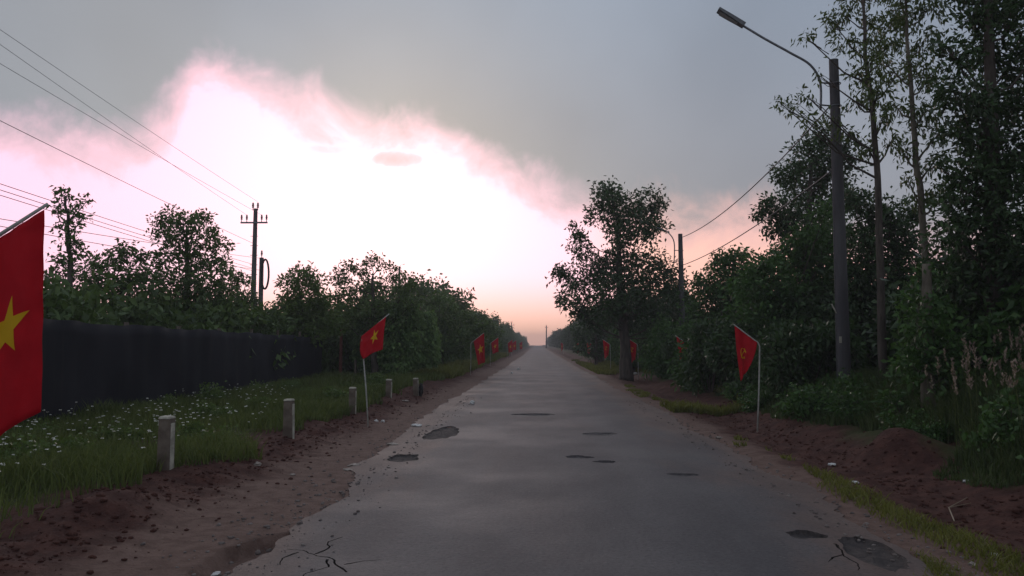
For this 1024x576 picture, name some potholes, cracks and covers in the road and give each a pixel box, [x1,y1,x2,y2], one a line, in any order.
crack [828,544,860,570]
pothole [785,530,828,539]
pothole [387,454,419,462]
crack [279,537,374,576]
pothole [838,536,909,572]
pothole [422,426,459,440]
